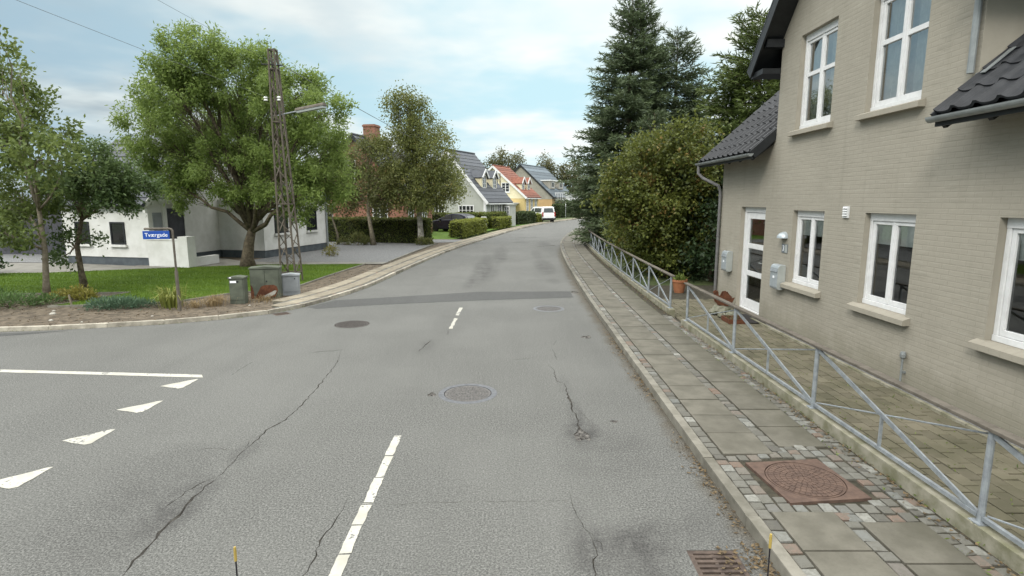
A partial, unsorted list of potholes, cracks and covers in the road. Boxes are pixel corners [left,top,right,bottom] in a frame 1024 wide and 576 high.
drain grate [687,551,750,576]
crack [552,349,581,429]
crack [122,350,340,576]
manhole cover [438,384,497,404]
crack [392,491,603,576]
manhole cover [745,459,872,506]
pothole [574,428,591,441]
